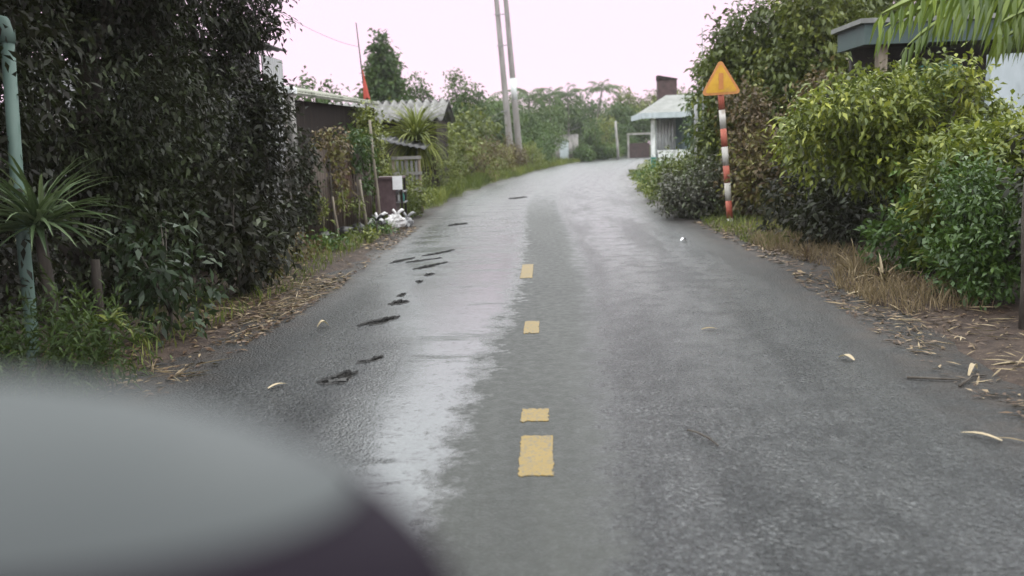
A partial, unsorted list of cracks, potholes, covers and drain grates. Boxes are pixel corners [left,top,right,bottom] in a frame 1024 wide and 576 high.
pothole [357,315,400,327]
pothole [315,370,359,386]
pothole [356,355,384,364]
